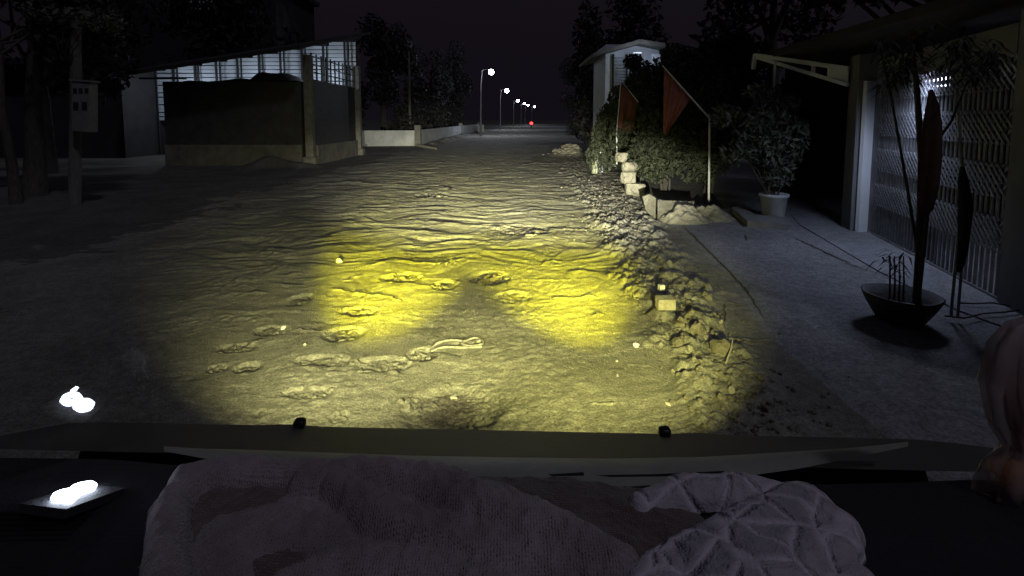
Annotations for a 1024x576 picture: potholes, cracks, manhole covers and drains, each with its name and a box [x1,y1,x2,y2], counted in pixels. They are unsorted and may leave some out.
pothole [491,290,532,305]
pothole [233,360,264,373]
pothole [319,325,368,342]
pothole [395,382,515,430]
pothole [207,363,228,373]
pothole [215,342,259,353]
pothole [277,385,334,399]
pothole [470,269,513,286]
crack [682,225,766,319]
crack [794,238,877,274]
